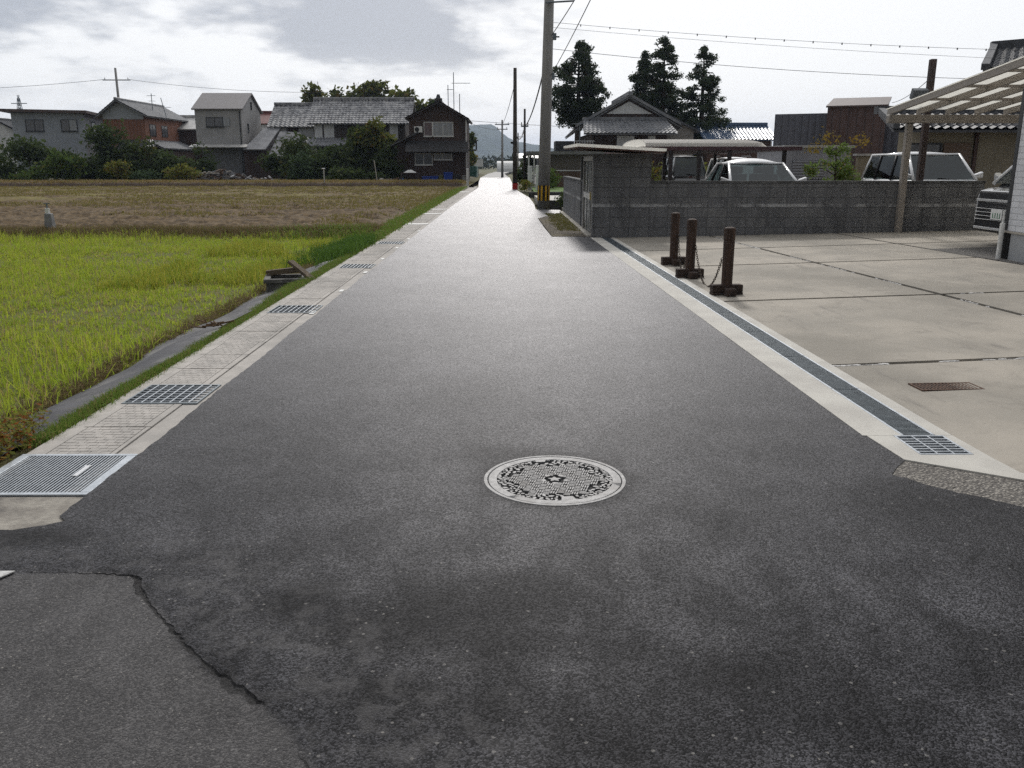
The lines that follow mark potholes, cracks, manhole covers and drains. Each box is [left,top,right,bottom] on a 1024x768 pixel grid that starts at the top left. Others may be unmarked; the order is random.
crack [28,572,309,768]
drain grate [782,356,858,390]
drain grate [645,266,671,275]
drain grate [832,389,935,435]
drain grate [674,285,707,298]
drain grate [894,435,974,455]
manhole cover [484,455,626,506]
drain grate [659,275,688,285]
drain grate [744,331,804,357]
drain grate [692,297,732,313]
drain grate [267,305,323,314]
